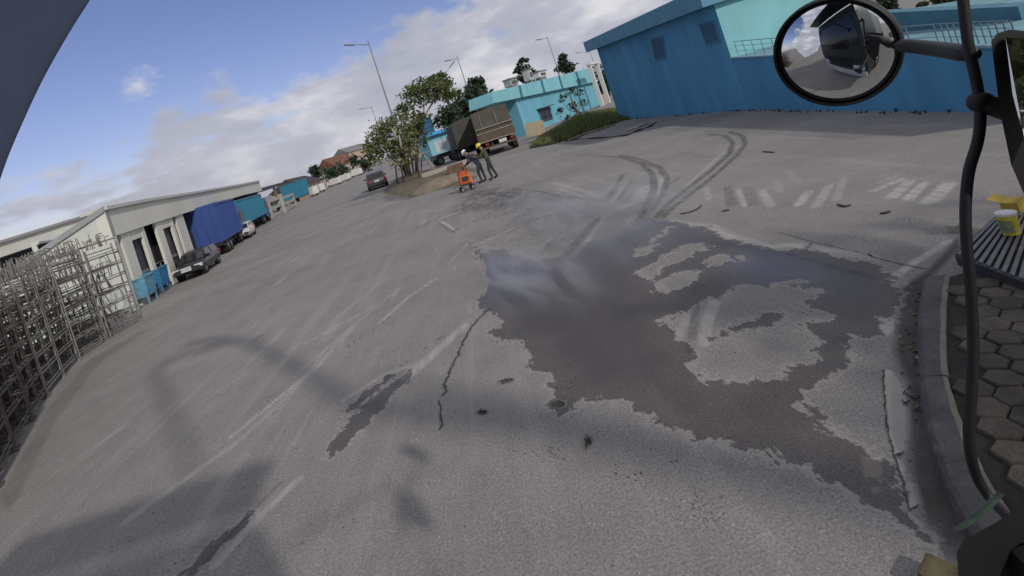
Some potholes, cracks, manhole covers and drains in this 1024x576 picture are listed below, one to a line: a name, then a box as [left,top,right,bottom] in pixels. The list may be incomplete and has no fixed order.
pothole [546,398,567,409]
pothole [582,433,595,452]
crack [438,308,491,430]
crack [881,369,919,513]
